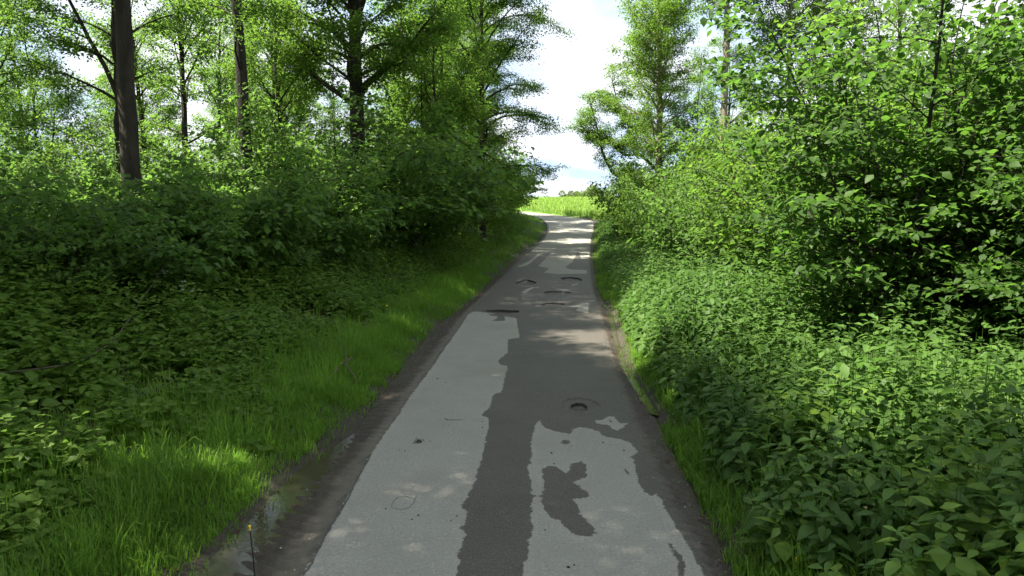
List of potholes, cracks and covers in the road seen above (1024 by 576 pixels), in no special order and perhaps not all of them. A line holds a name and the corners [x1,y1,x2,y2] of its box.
pothole [559,396,604,415]
pothole [511,279,538,288]
